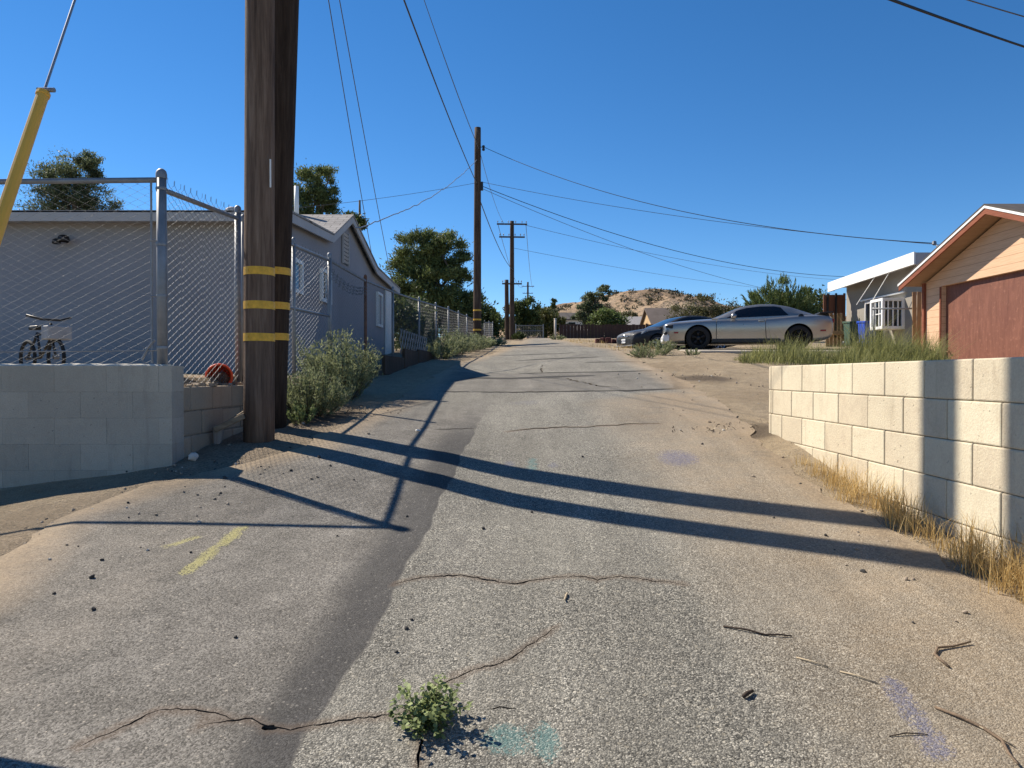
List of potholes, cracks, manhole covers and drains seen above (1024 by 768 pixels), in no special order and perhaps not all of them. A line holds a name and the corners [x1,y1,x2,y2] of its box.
crack [540,364,620,388]
crack [396,574,684,585]
crack [79,627,556,768]
crack [514,423,659,431]
